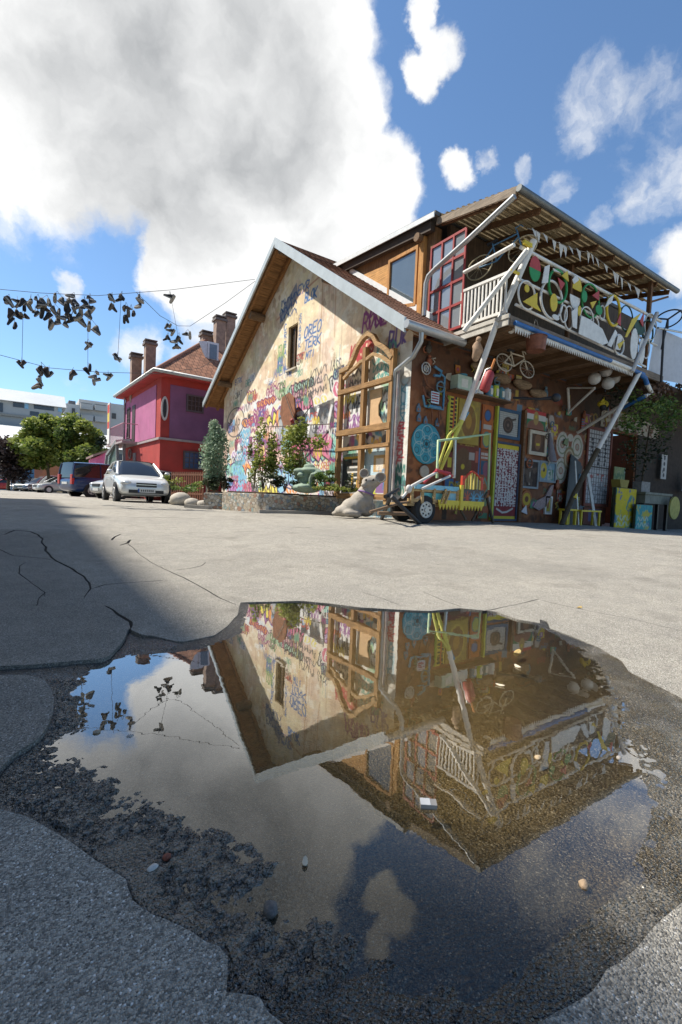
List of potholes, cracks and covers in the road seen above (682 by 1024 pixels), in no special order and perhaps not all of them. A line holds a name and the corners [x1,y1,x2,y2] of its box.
pothole [0,602,682,1024]
crack [1,530,162,628]
